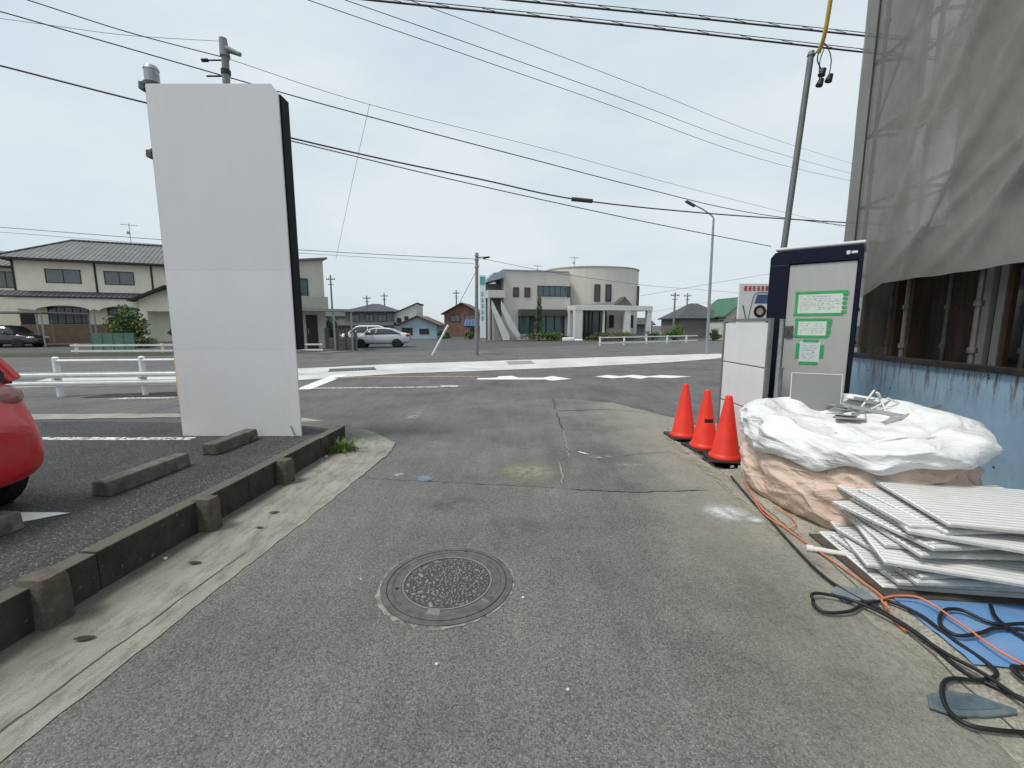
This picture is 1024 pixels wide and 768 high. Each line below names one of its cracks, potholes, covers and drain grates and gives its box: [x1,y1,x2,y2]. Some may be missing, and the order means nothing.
crack [552,397,694,492]
manhole cover [375,547,515,630]
